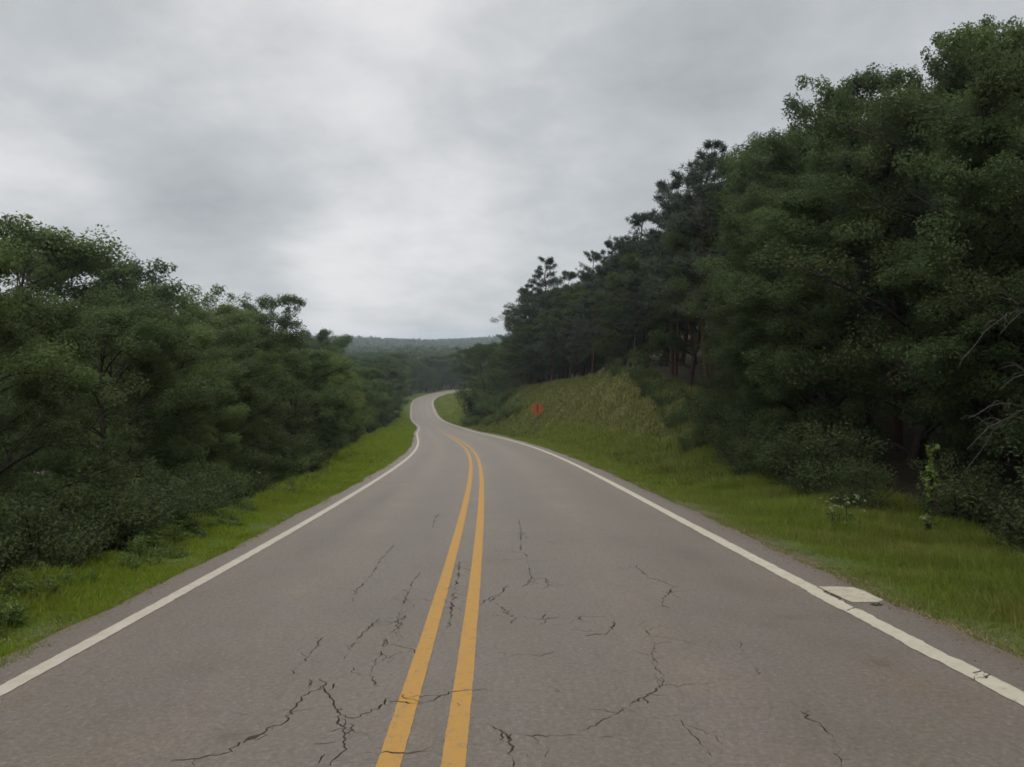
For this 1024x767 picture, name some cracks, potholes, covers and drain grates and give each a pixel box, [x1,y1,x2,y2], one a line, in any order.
crack [487,623,713,766]
crack [782,710,867,767]
crack [172,520,616,767]
crack [680,720,722,756]
crack [617,564,682,608]
